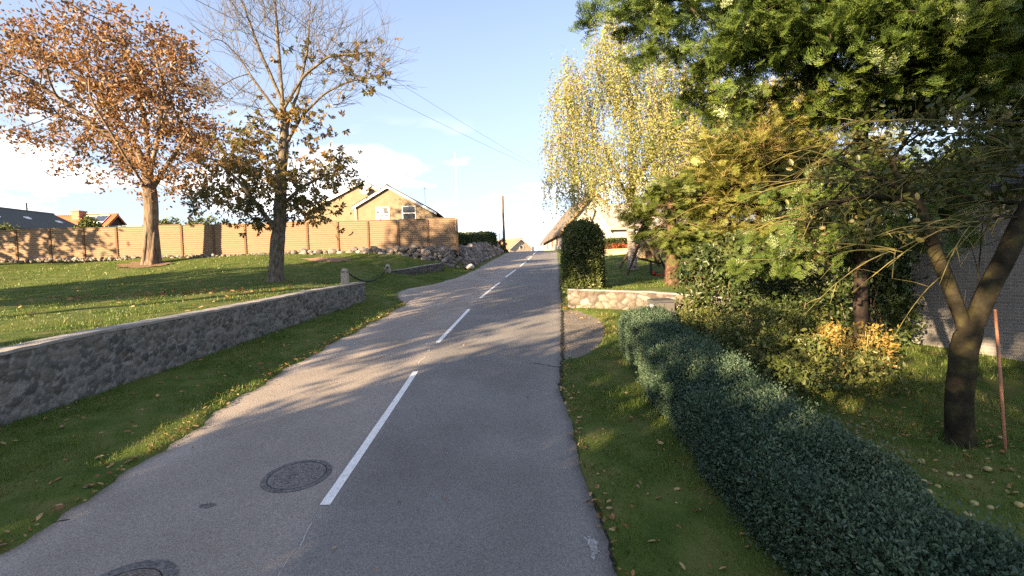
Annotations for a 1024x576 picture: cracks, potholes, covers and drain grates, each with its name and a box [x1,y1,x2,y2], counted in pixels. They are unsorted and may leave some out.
manhole cover [260,460,332,493]
manhole cover [101,559,179,576]
crack [278,522,312,576]
